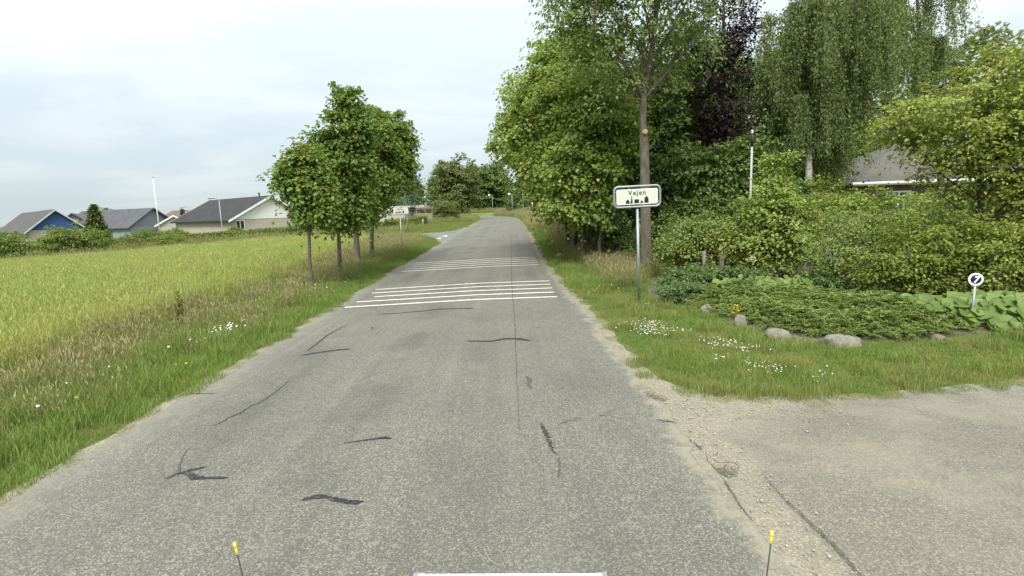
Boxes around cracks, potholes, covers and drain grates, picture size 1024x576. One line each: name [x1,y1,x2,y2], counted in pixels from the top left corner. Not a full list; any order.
crack [656,419,753,521]
pothole [705,452,739,479]
